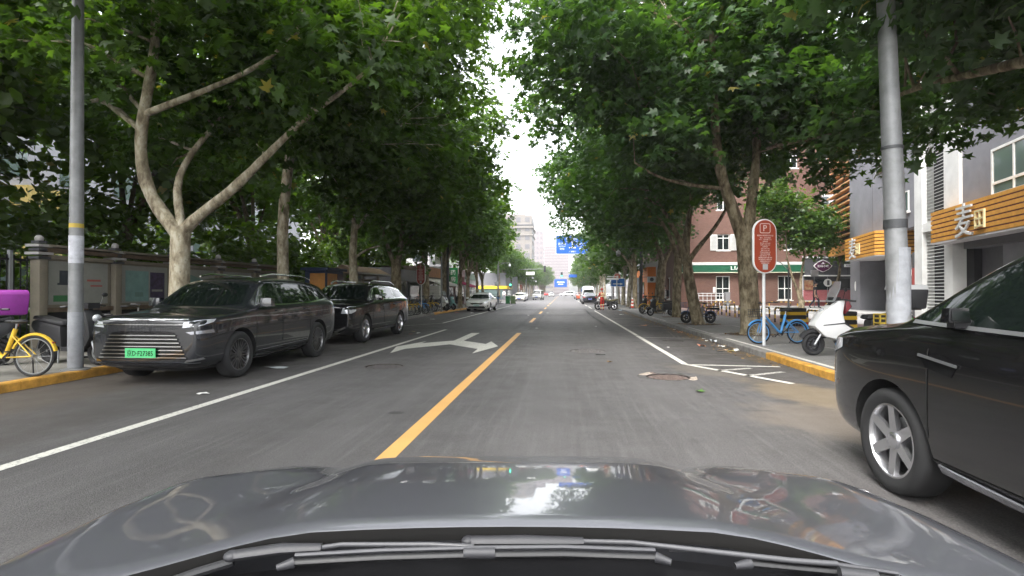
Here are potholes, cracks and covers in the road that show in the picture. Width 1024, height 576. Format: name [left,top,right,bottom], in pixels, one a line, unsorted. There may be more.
manhole cover [637,372,698,381]
